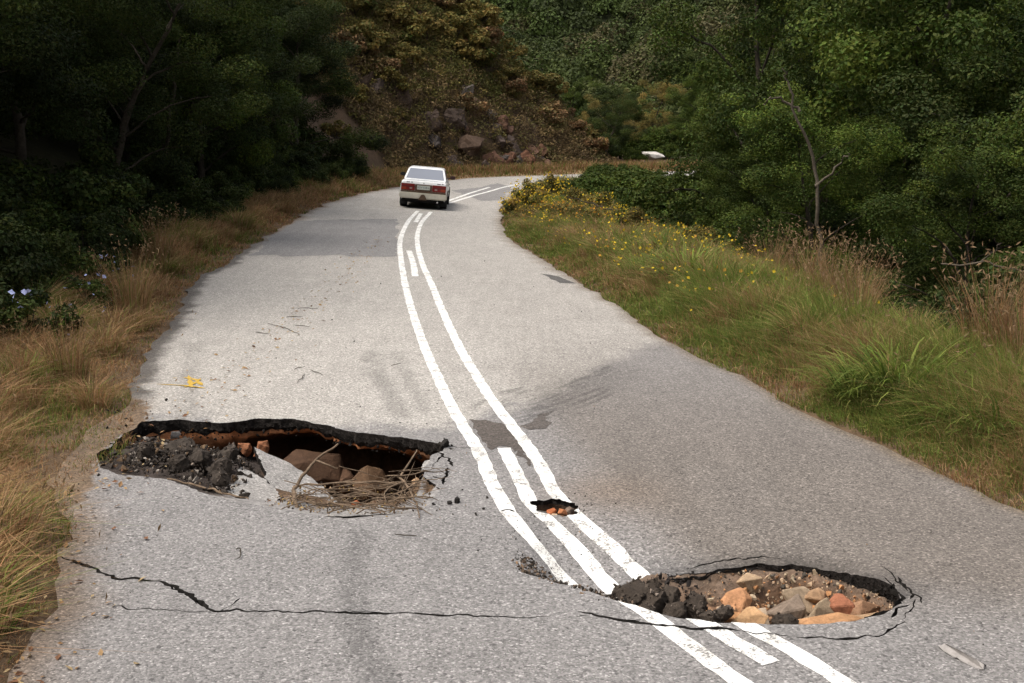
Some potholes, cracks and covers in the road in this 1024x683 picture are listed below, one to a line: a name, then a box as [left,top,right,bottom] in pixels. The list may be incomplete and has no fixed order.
crack [669,556,789,584]
pothole [530,499,578,517]
pothole [96,418,449,519]
pothole [524,563,902,638]
crack [578,566,922,640]
crack [60,556,548,618]
